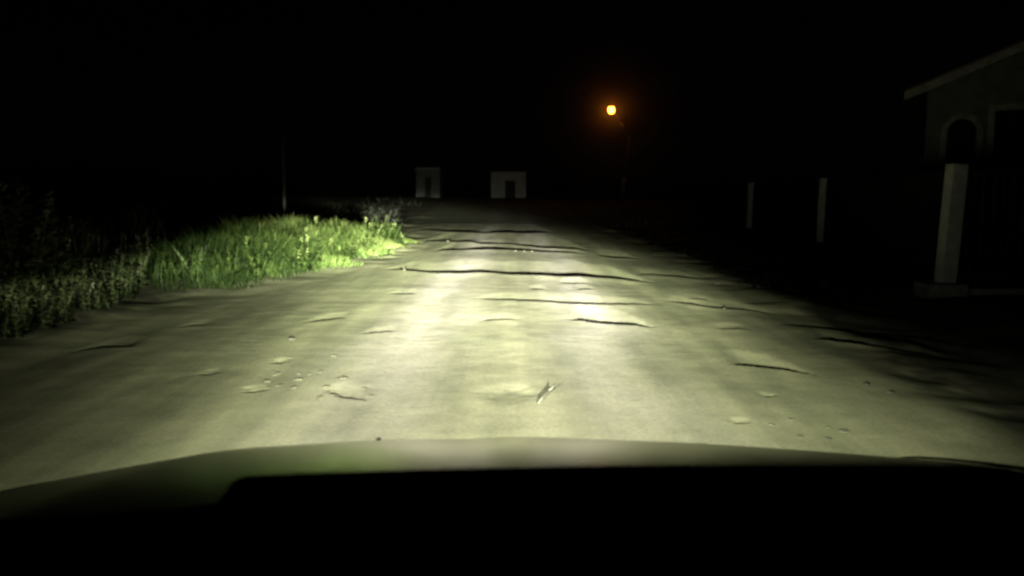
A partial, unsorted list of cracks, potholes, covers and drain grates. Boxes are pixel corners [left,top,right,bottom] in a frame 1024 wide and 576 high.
crack [473,282,635,305]
crack [323,389,372,400]
crack [669,298,773,329]
crack [813,338,943,357]
pothole [239,384,273,393]
pothole [471,384,543,404]
